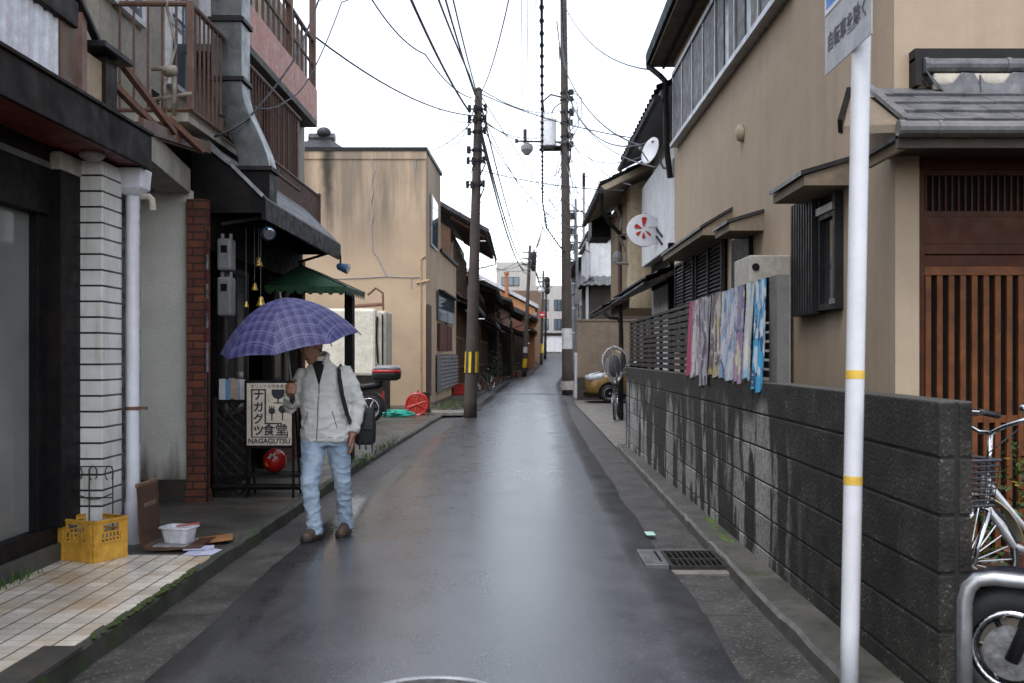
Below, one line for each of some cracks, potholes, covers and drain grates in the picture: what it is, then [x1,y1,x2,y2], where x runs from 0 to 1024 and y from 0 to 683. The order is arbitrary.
drain grate [637,541,731,576]
